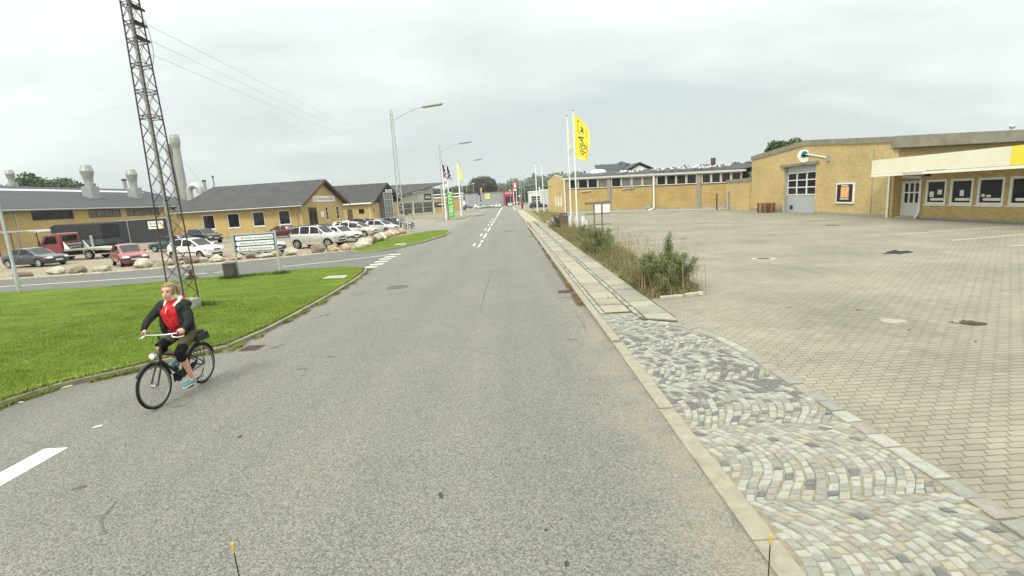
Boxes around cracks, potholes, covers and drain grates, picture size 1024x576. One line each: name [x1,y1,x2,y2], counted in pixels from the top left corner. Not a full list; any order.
crack [99,501,116,534]
